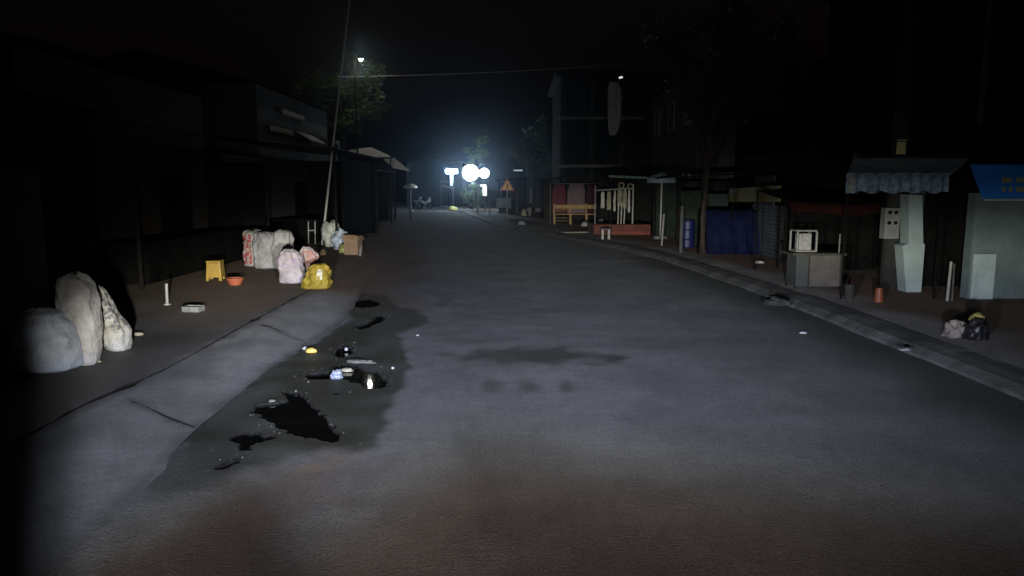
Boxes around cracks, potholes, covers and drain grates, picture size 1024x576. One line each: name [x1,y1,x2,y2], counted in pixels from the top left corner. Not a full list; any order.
pothole [229,431,276,451]
pothole [332,345,354,358]
pothole [353,315,386,330]
pothole [299,364,390,389]
pothole [354,298,381,308]
pothole [214,458,241,470]
pothole [249,390,341,443]
